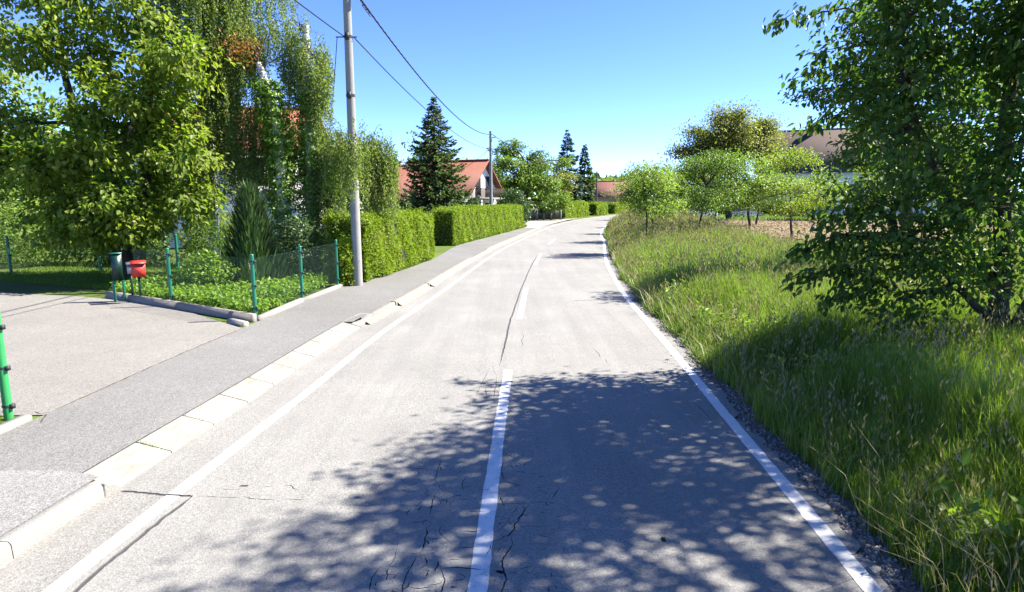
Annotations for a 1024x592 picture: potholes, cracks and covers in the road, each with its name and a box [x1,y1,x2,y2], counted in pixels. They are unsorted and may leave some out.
crack [210,485,300,500]
crack [369,452,558,592]
